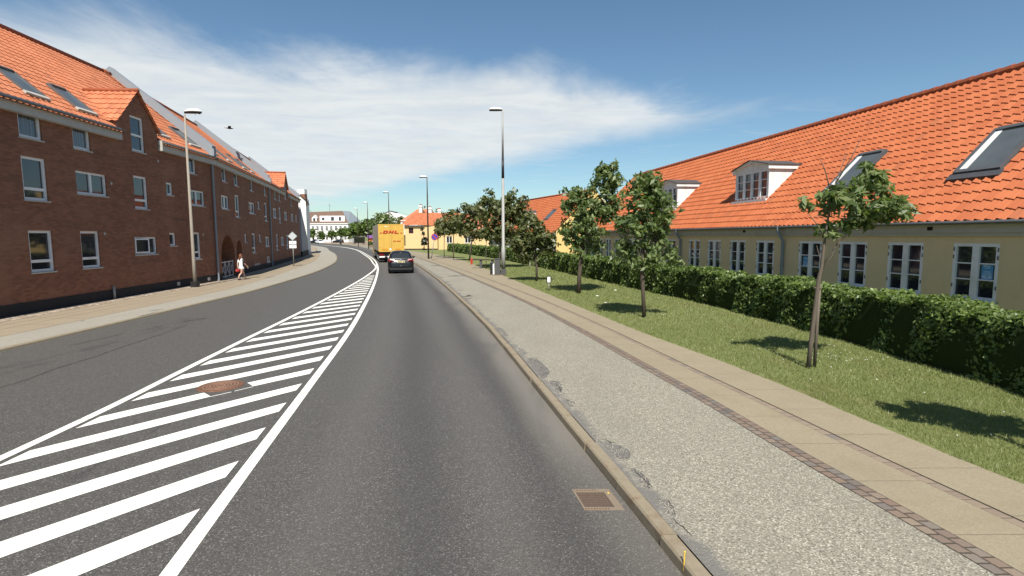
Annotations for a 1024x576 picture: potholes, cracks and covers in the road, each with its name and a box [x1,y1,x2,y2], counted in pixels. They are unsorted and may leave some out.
pothole [526,357,550,378]
manhole cover [196,380,245,392]
pothole [598,440,631,460]
pothole [550,381,562,394]
drain grate [572,489,625,510]
